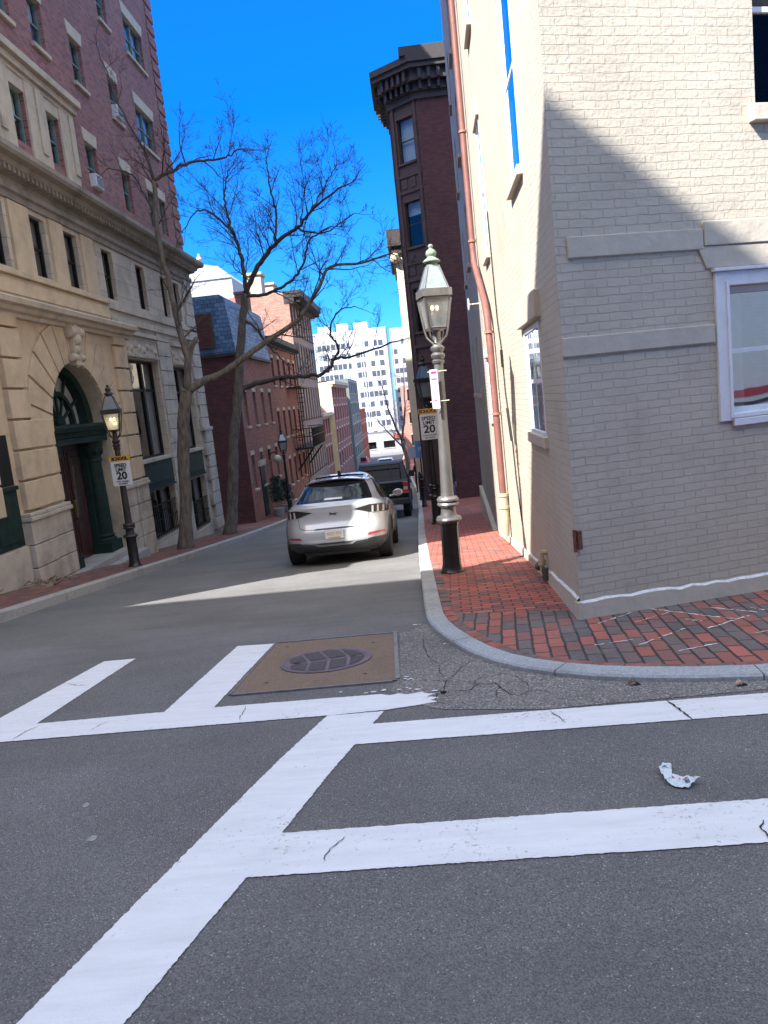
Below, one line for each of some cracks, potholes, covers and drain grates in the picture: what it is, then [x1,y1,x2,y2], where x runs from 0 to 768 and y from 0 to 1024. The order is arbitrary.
crack [423,639,551,704]
manhole cover [229,631,400,697]
